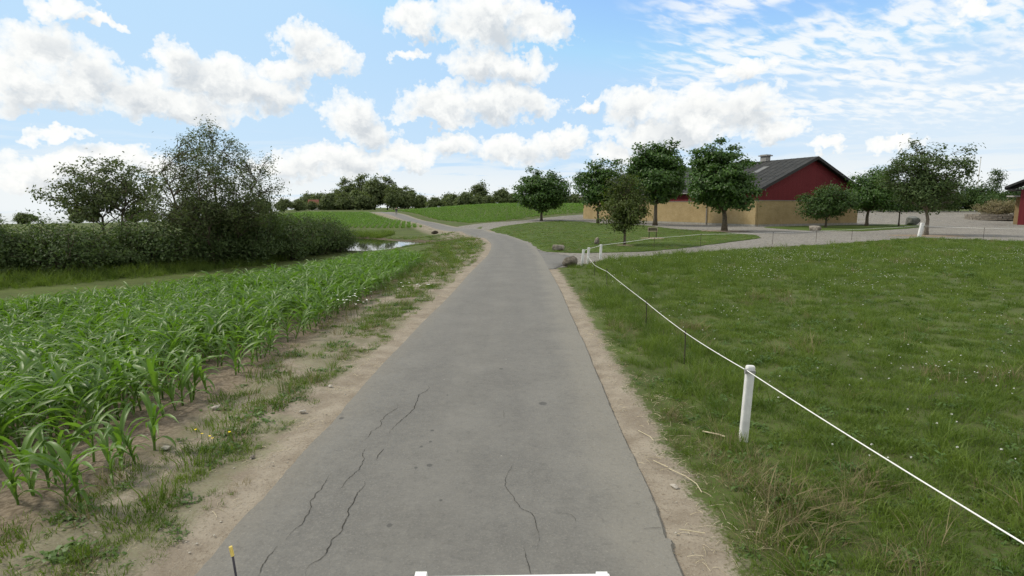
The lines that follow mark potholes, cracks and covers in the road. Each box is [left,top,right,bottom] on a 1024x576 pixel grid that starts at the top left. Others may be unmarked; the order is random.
crack [260,386,429,574]
